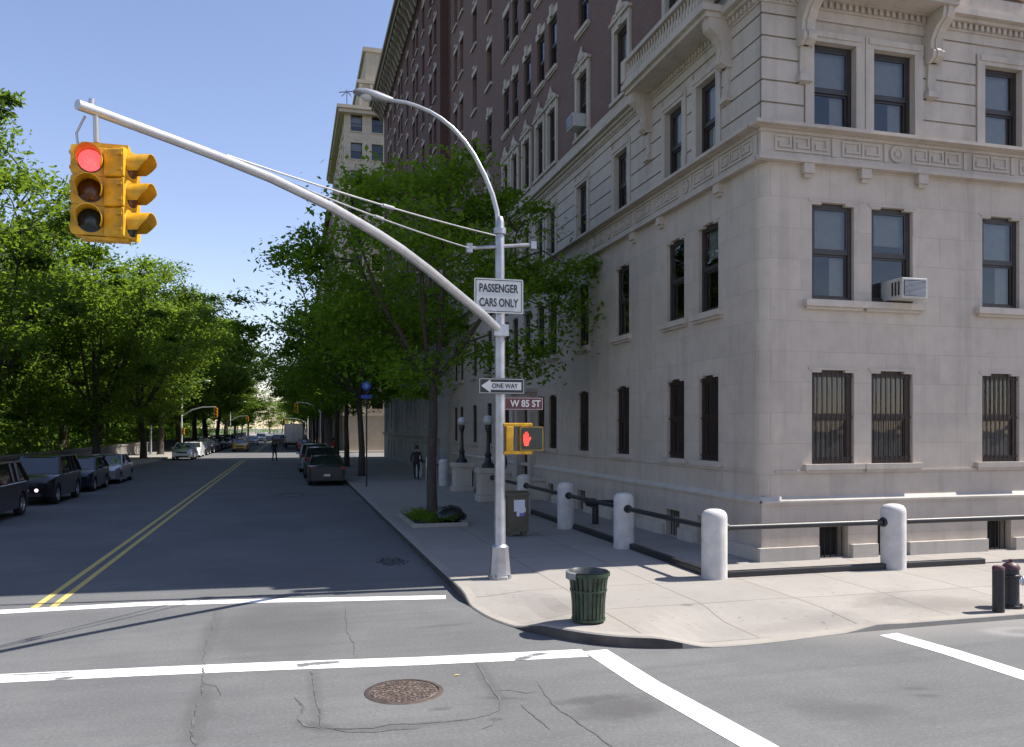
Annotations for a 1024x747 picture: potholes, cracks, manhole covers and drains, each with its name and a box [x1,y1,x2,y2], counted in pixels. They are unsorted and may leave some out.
crack [295,662,614,747]
manhole cover [364,679,444,705]
